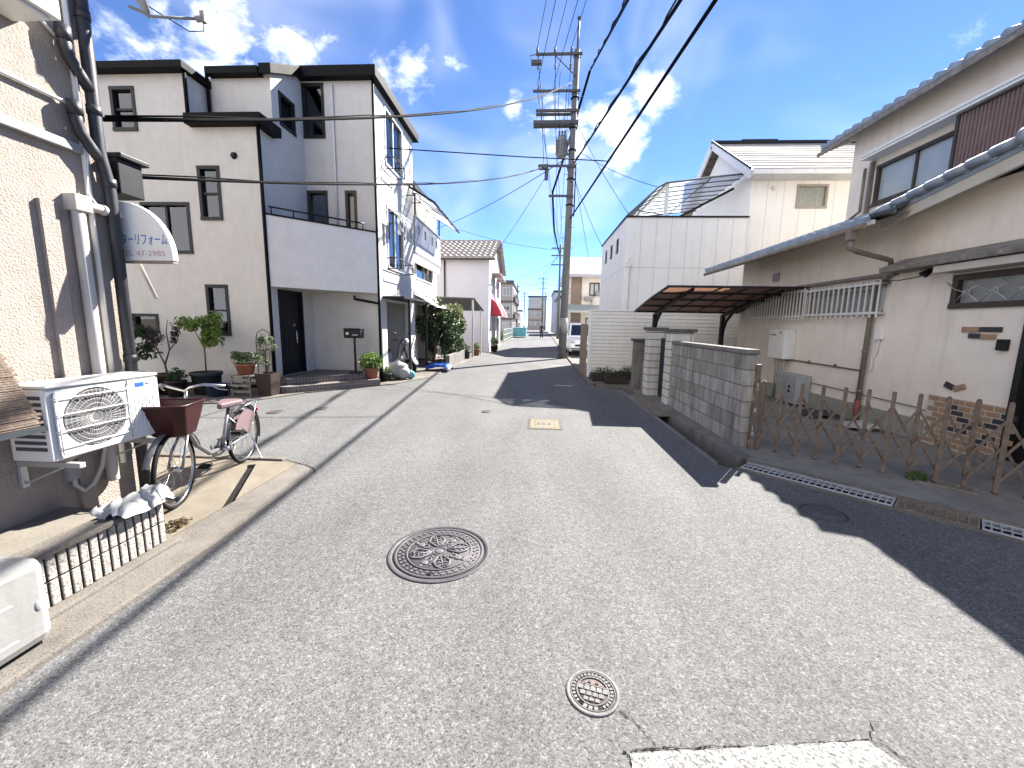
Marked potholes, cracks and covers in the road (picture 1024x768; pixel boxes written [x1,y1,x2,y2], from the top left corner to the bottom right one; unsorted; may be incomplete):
manhole cover [799,503,850,523]
drain grate [981,519,1024,540]
manhole cover [387,526,490,584]
manhole cover [566,669,620,718]
drain grate [894,498,980,529]
drain grate [740,462,896,507]
crack [620,710,915,768]
